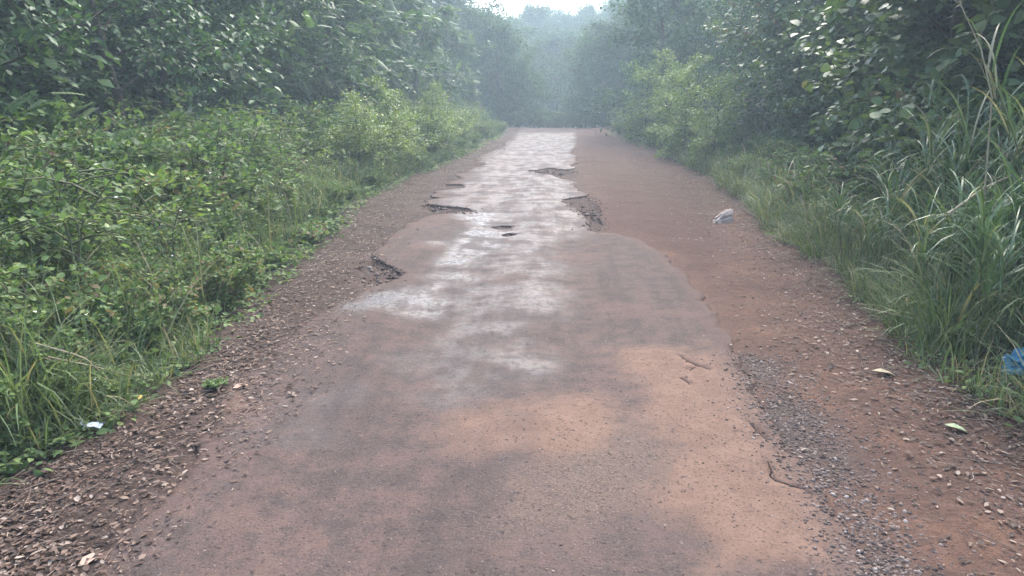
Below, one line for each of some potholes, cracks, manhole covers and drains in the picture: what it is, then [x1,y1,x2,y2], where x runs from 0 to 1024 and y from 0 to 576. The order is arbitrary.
pothole [418,203,483,215]
pothole [529,168,578,177]
pothole [561,196,609,233]
pothole [342,253,407,287]
